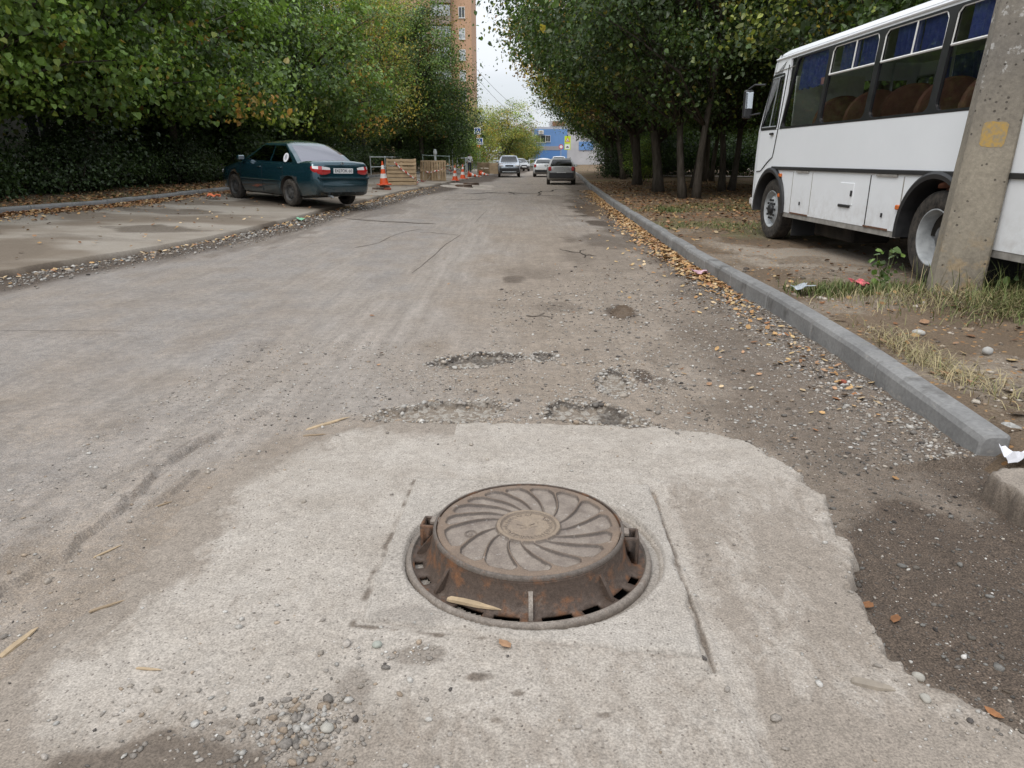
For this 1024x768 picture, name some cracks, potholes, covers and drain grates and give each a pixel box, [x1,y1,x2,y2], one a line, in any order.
pothole [362,400,507,424]
pothole [596,368,633,397]
pothole [543,400,659,427]
crack [347,218,454,248]
pothole [534,352,556,362]
pothole [430,352,523,369]
manhole cover [406,483,652,630]
